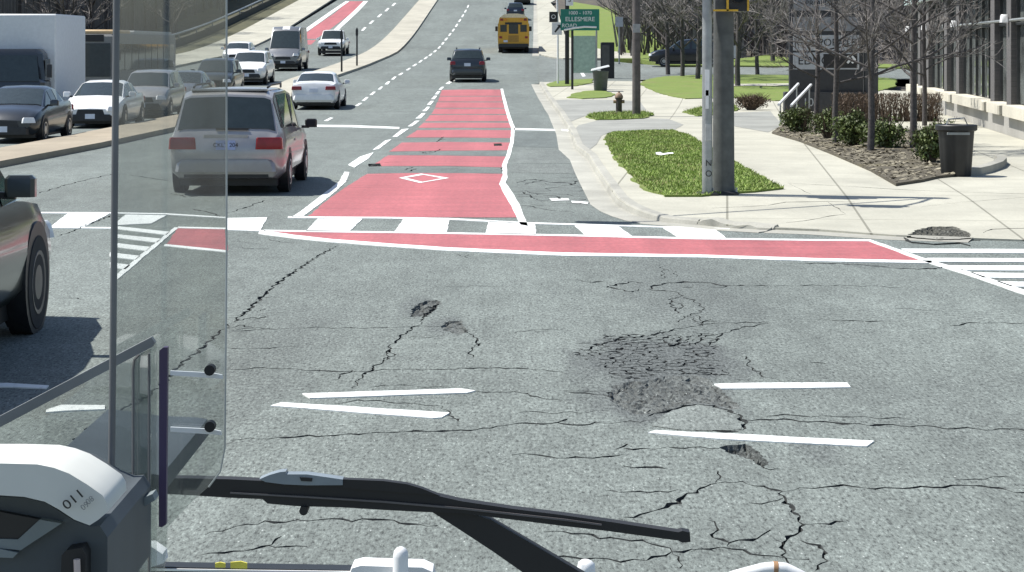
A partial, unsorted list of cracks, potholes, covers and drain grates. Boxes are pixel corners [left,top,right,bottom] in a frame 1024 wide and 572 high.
pothole [719,444,769,467]
pothole [442,321,468,335]
crack [501,168,589,206]
crack [72,246,1024,571]
pothole [410,300,442,317]
